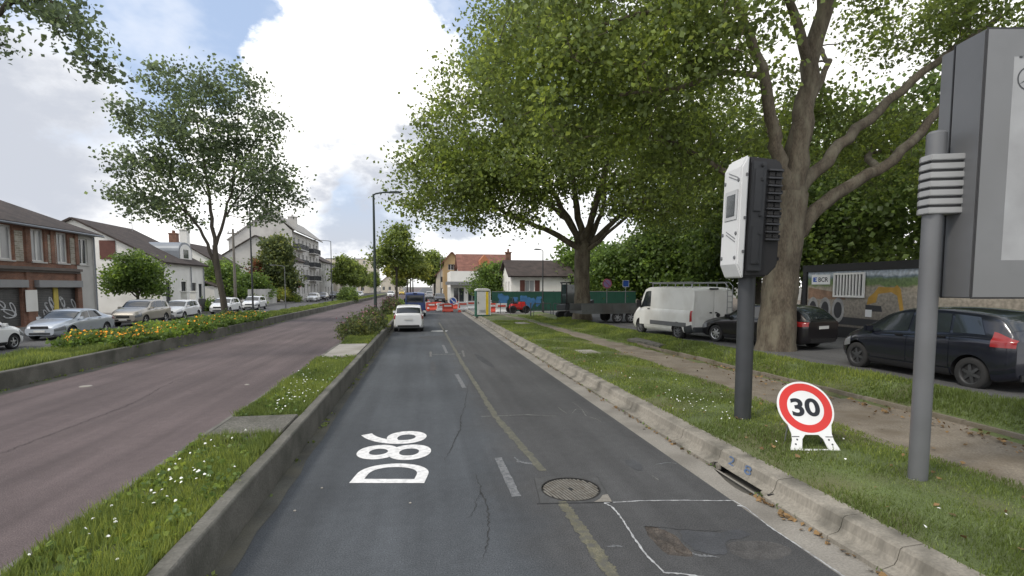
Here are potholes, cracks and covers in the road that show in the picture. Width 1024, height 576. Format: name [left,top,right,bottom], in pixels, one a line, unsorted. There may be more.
manhole cover [534,476,613,504]
drain grate [714,462,774,497]
crack [468,475,490,557]
crack [444,384,469,460]
